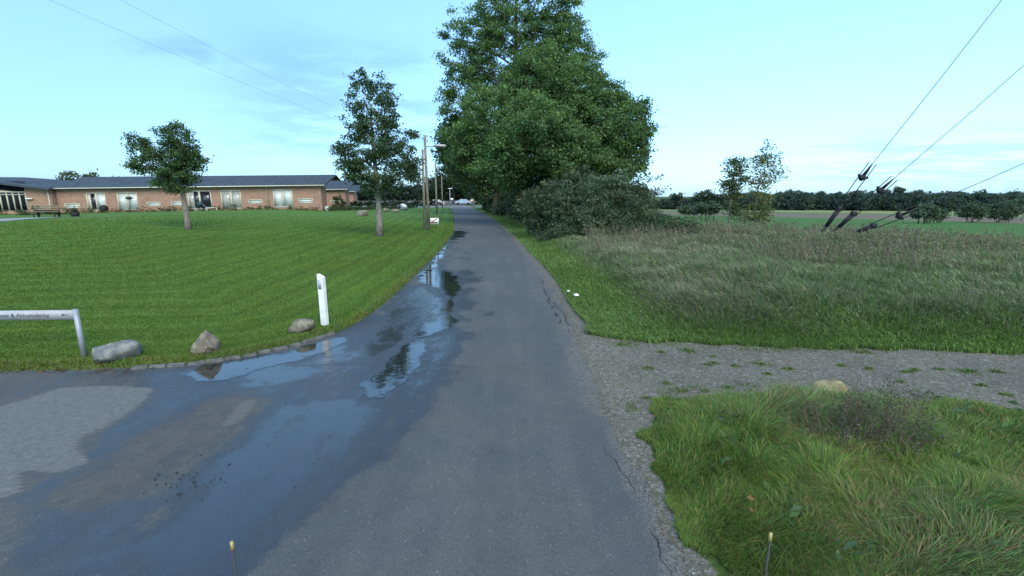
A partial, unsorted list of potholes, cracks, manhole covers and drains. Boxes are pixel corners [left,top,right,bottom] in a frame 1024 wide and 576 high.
crack [542,281,572,333]
crack [604,450,672,576]
